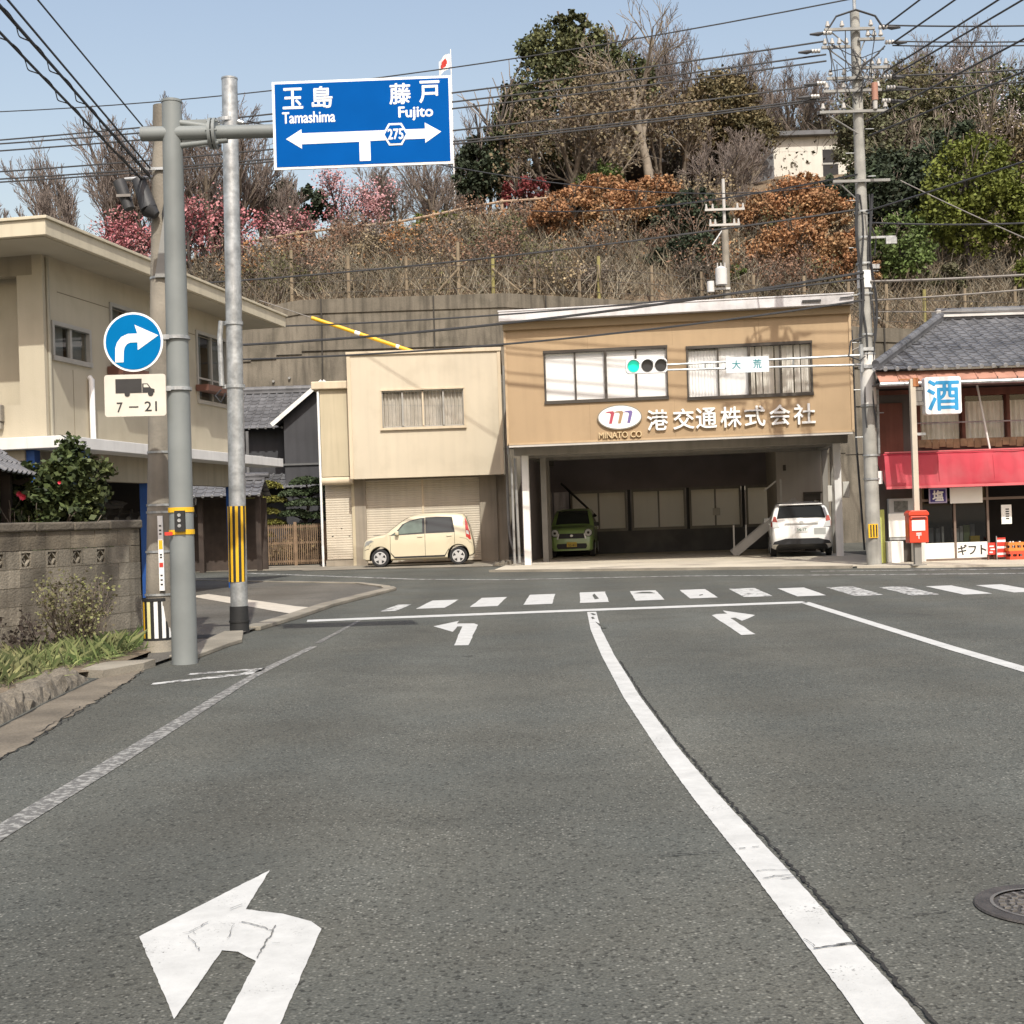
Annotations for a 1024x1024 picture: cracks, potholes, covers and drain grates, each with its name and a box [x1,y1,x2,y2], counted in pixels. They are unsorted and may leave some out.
manhole cover [973,884,1024,924]
